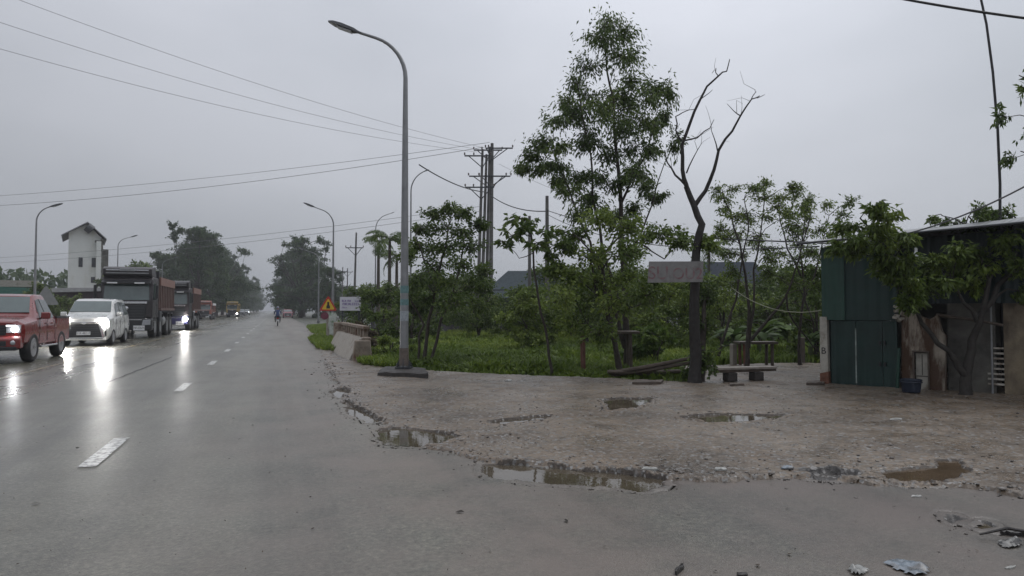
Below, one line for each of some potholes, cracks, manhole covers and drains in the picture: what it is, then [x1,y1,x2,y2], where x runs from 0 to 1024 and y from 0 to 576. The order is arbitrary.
pothole [597,396,663,412]
pothole [324,386,356,399]
pothole [473,458,677,495]
pothole [370,425,468,449]
pothole [480,413,557,426]
pothole [935,511,982,527]
pothole [336,400,387,425]
pothole [789,464,871,484]
pothole [868,456,987,489]
pothole [674,412,799,424]
